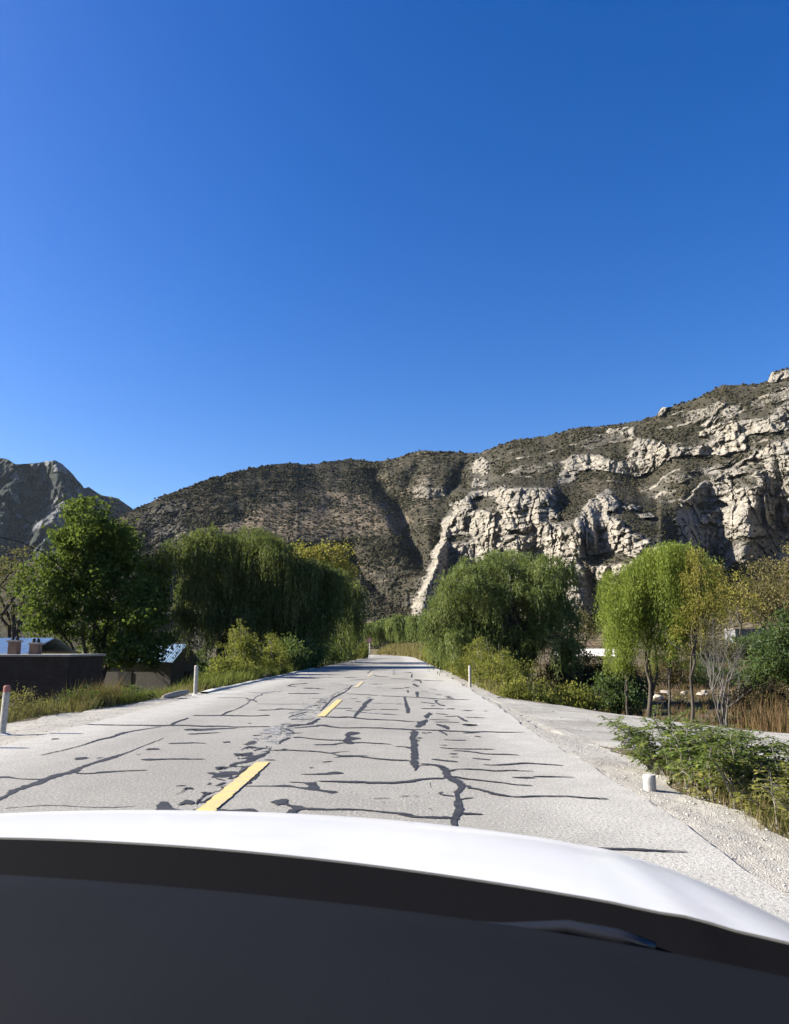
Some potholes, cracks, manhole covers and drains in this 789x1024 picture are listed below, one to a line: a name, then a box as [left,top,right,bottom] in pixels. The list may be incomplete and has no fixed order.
crack [42,670,567,778]
crack [217,781,337,812]
